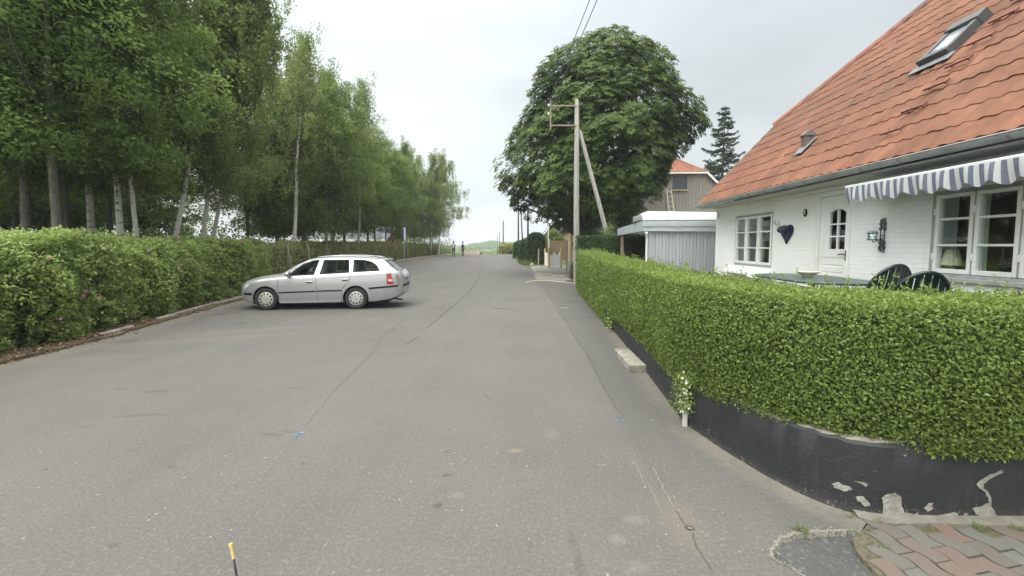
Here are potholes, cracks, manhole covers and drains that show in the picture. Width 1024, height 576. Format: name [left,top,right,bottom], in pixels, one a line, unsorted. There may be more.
manhole cover [493,301,517,309]
crack [406,262,483,344]
crack [532,271,713,571]
